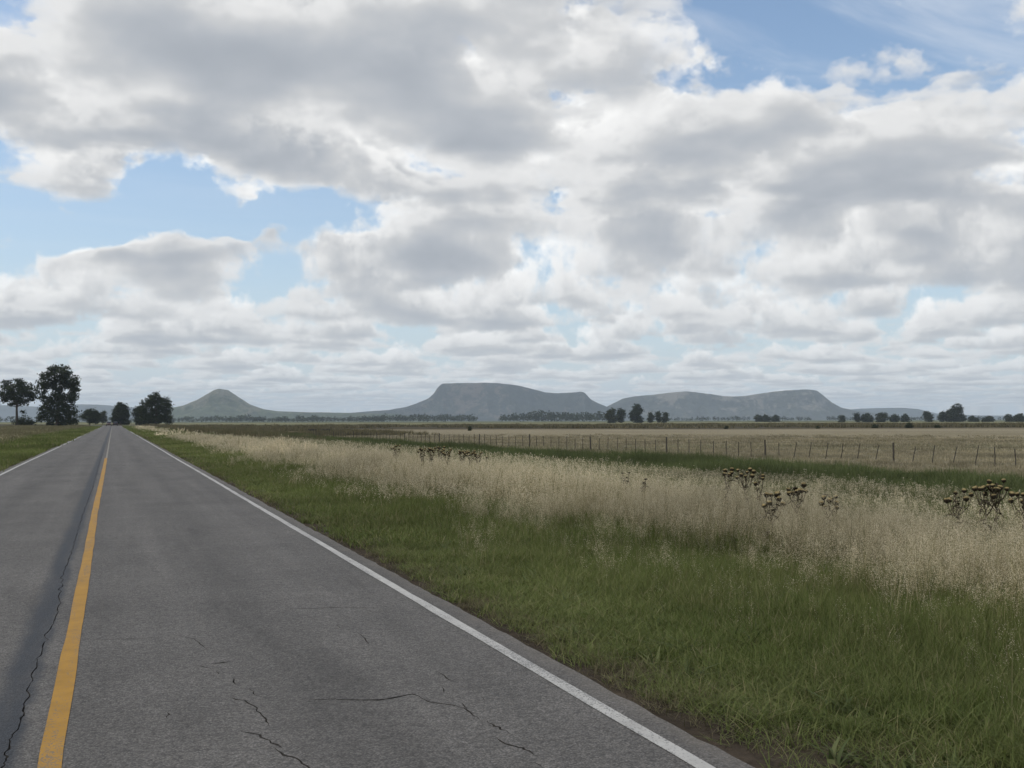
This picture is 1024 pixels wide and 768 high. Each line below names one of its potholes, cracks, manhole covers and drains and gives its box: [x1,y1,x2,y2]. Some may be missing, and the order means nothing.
crack [0,457,102,768]
crack [315,673,542,767]
crack [187,637,310,768]
